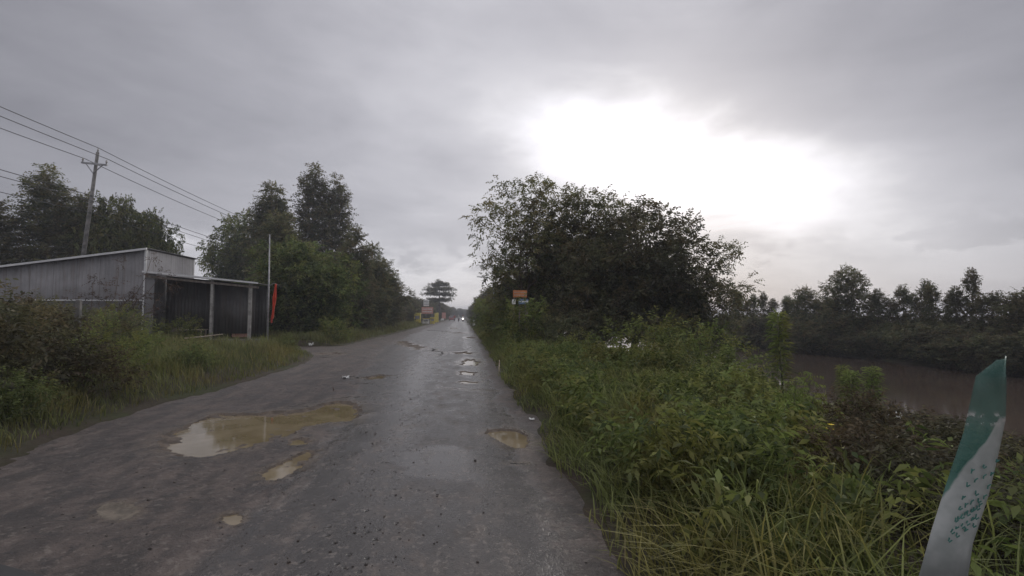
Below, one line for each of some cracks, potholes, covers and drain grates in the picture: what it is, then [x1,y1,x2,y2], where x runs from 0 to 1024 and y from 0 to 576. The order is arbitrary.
pothole [219,512,244,525]
pothole [459,358,481,366]
pothole [397,341,425,350]
pothole [258,450,316,480]
pothole [484,428,530,449]
pothole [157,401,363,457]
